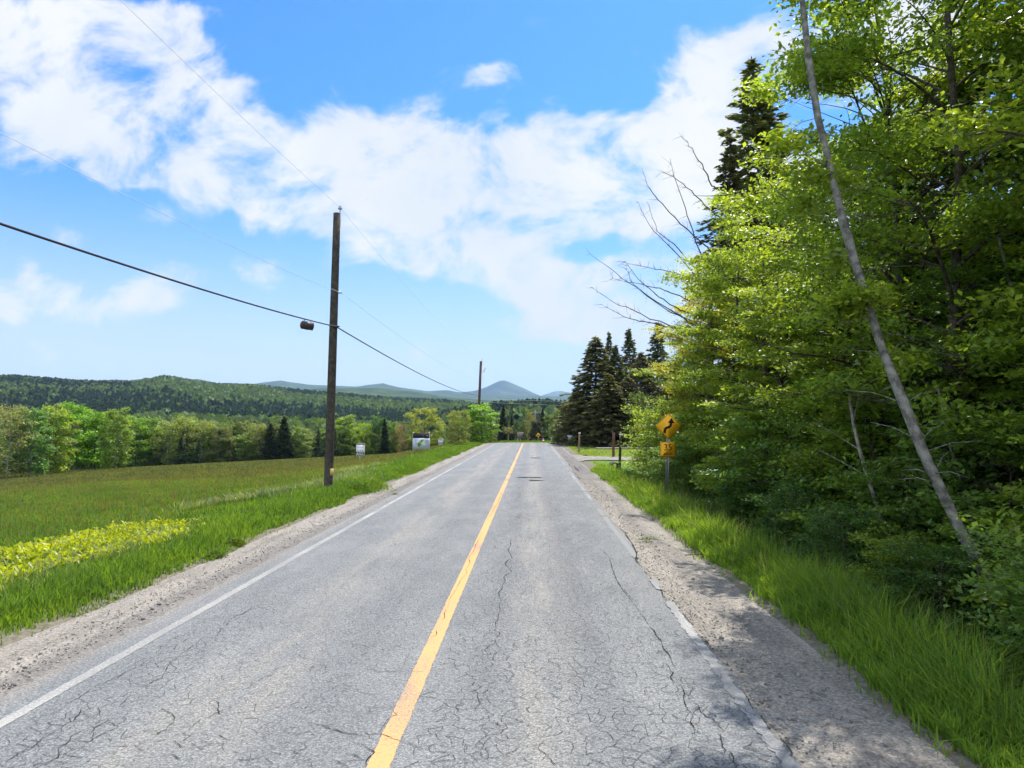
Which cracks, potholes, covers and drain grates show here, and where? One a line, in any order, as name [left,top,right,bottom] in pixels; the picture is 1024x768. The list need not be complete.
crack [0,476,793,768]
